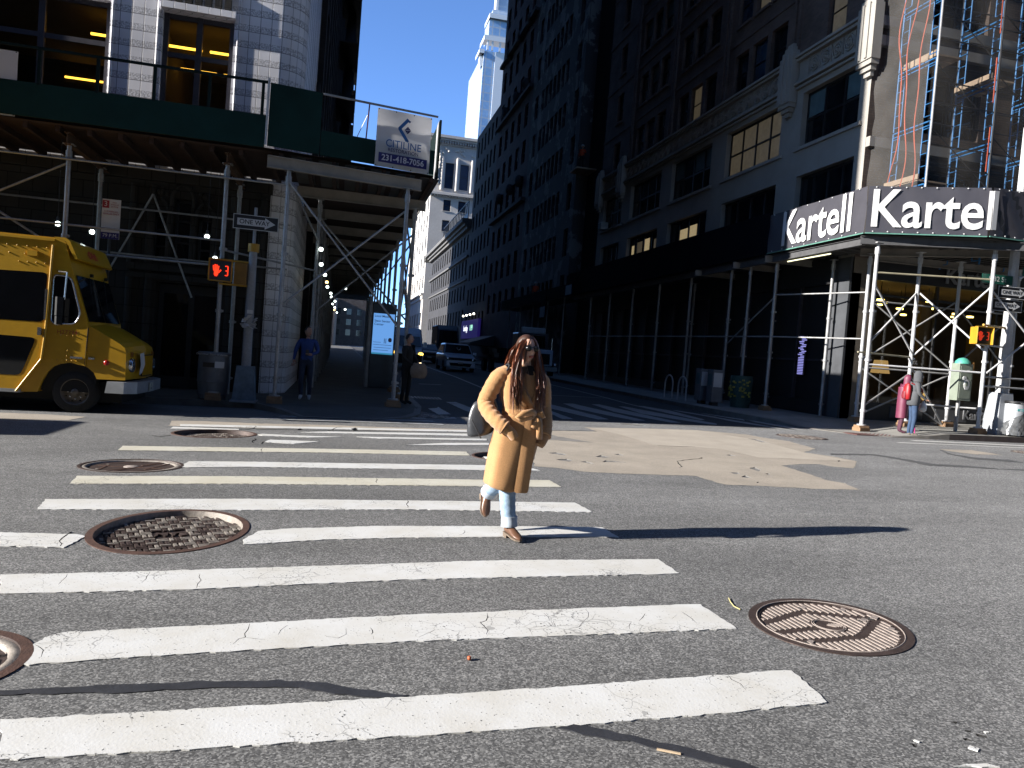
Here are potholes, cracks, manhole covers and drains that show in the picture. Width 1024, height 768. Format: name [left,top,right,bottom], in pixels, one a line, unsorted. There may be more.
manhole cover [0,630,34,679]
manhole cover [77,459,184,473]
manhole cover [748,598,915,657]
manhole cover [84,509,250,555]
manhole cover [171,429,257,438]
